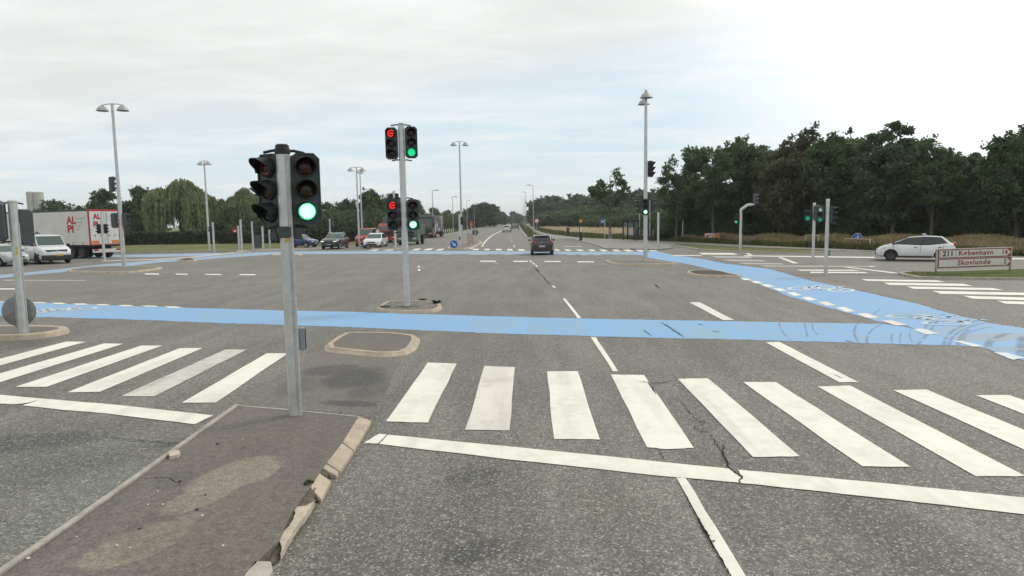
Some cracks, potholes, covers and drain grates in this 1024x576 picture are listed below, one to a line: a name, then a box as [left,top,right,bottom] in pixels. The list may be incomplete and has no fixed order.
crack [641,381,743,483]
